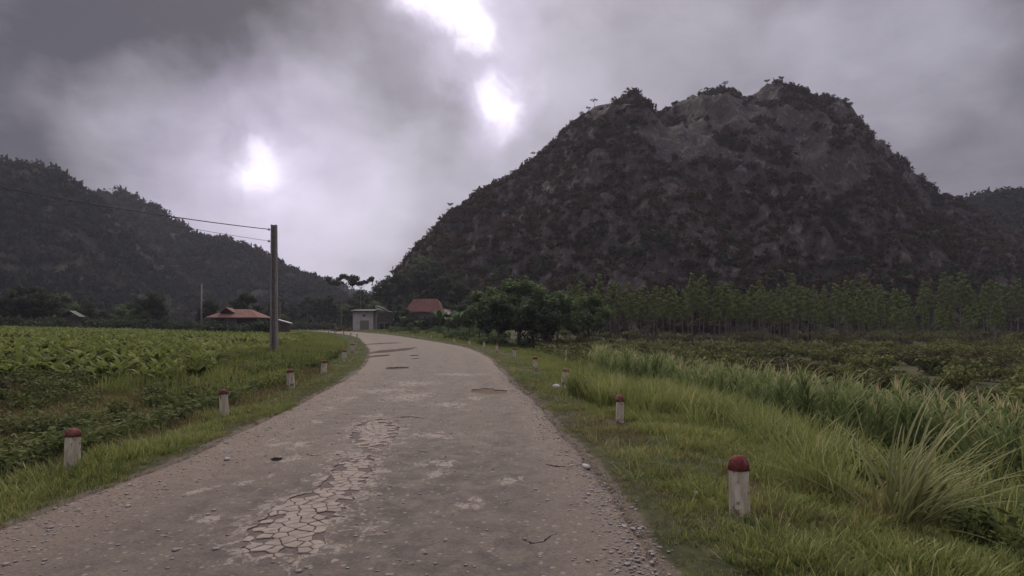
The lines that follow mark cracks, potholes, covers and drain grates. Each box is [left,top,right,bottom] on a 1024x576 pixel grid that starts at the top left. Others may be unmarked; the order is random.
crack [240,416,425,560]
